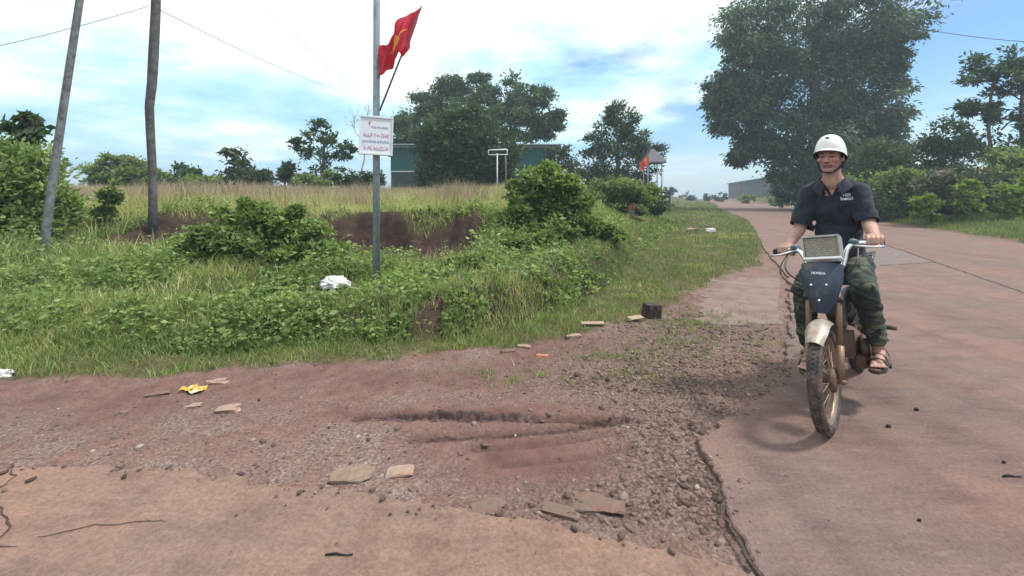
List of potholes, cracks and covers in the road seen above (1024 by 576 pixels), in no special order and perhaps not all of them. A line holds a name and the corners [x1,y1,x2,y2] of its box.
crack [38,520,165,537]
crack [0,468,18,547]
pothole [363,409,536,423]
